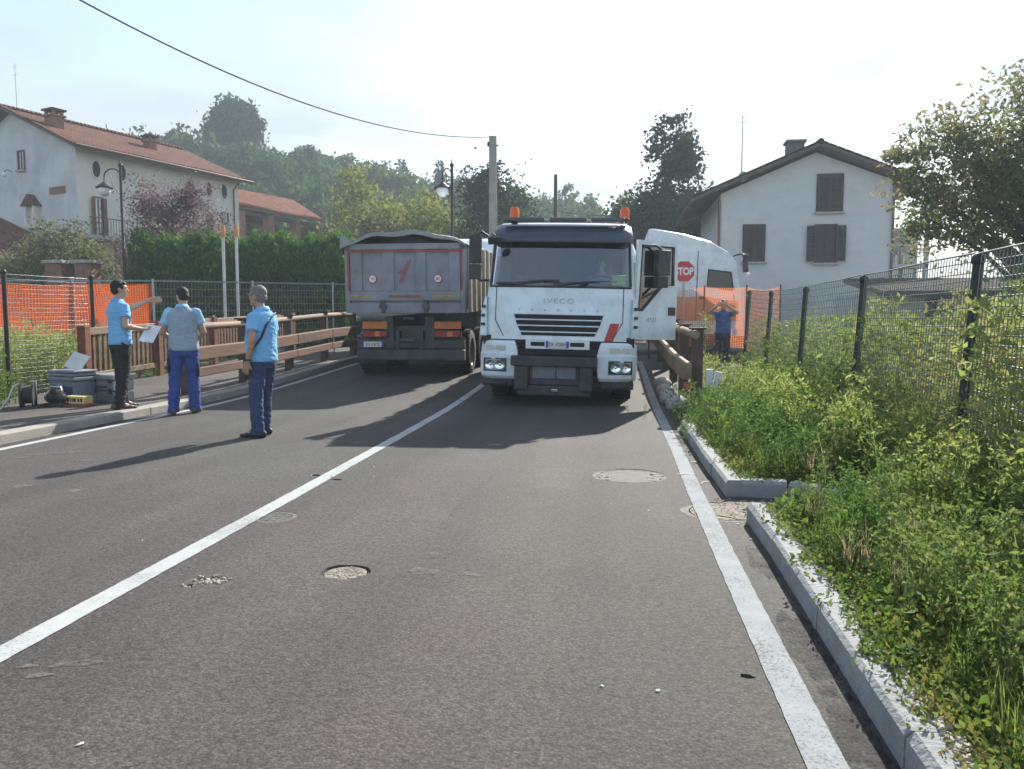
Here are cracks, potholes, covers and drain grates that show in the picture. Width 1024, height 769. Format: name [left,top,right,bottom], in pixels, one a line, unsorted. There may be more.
pothole [190,574,233,584]
manhole cover [593,469,667,483]
manhole cover [256,512,298,523]
manhole cover [680,502,747,522]
manhole cover [320,565,371,579]
